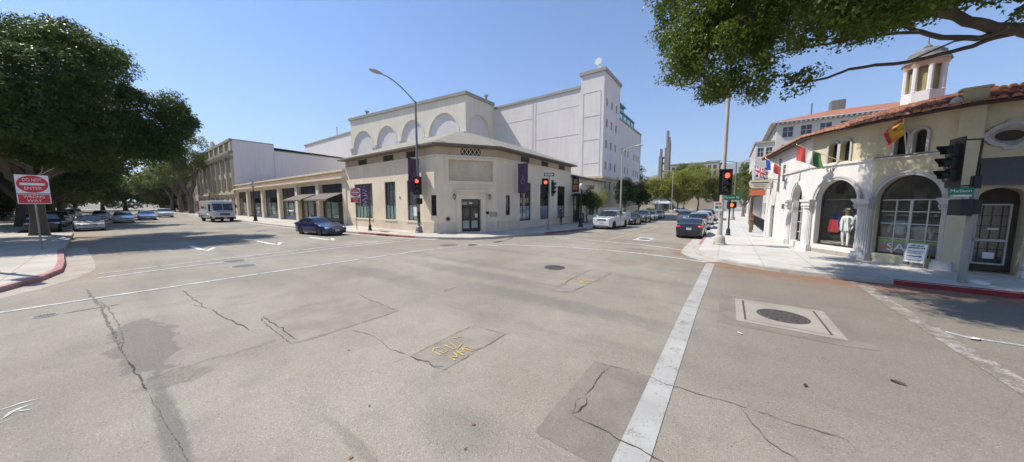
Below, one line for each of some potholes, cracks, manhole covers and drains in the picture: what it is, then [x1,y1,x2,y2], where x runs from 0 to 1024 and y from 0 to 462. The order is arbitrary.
crack [183,291,396,342]
manhole cover [735,298,849,341]
